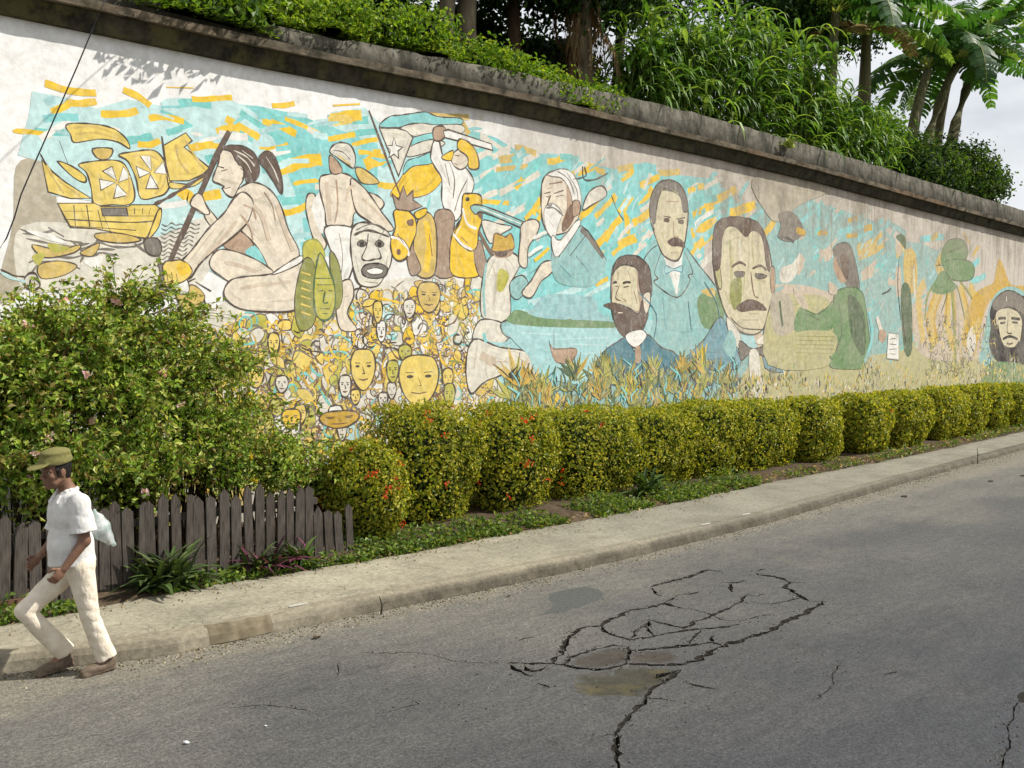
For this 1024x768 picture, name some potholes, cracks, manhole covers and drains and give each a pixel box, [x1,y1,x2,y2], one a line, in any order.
crack [227,568,1024,768]
